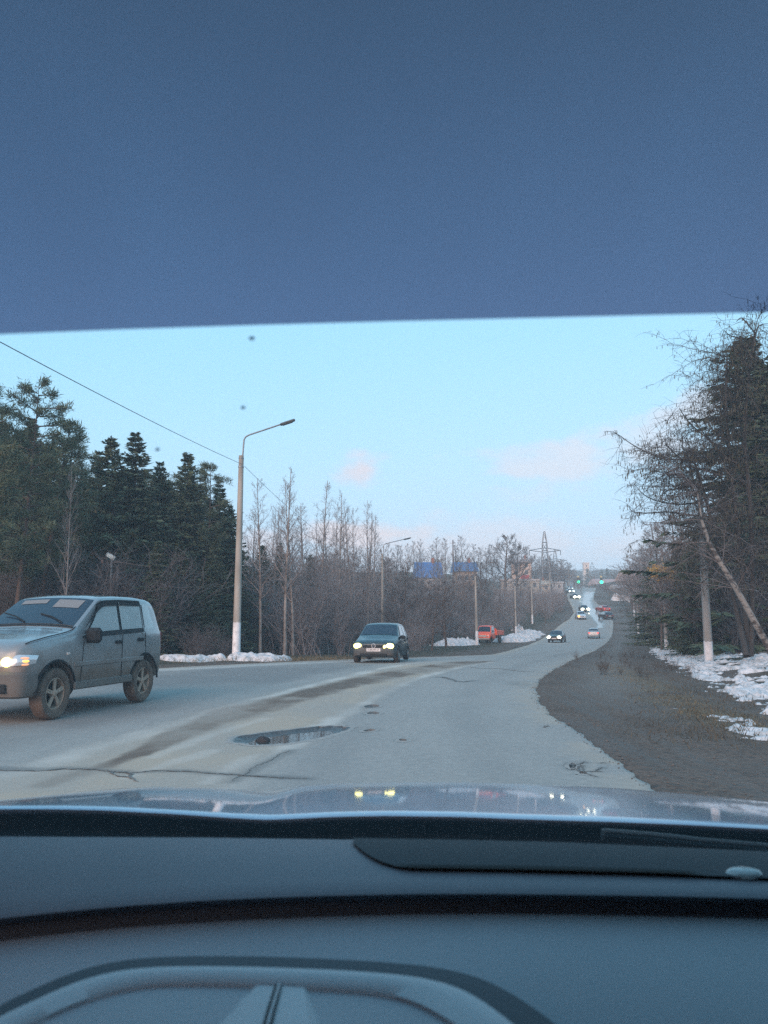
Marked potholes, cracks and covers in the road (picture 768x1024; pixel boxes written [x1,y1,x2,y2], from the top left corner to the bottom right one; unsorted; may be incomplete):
crack [569,761,605,777]
pothole [225,725,357,746]
crack [0,750,291,782]
